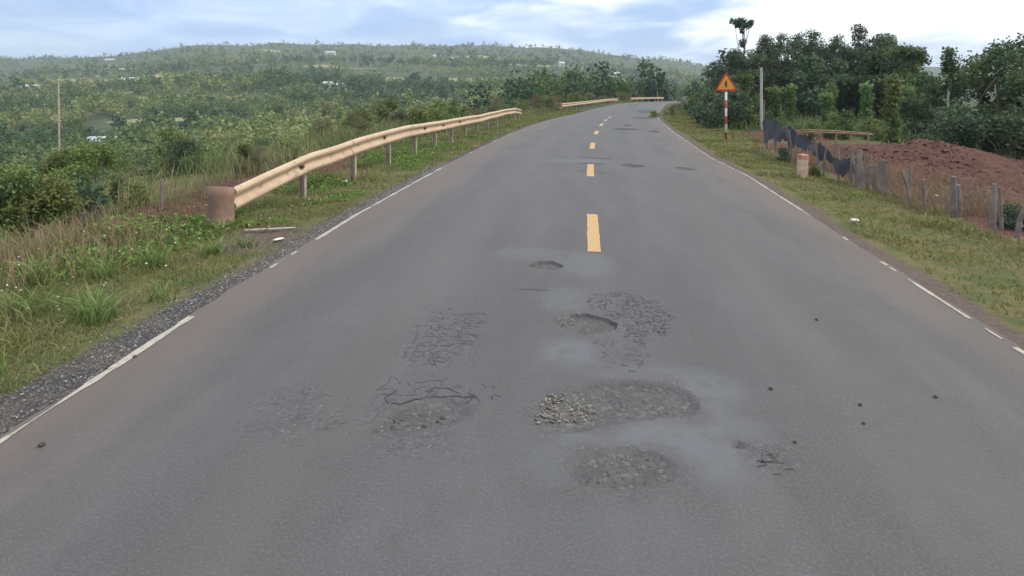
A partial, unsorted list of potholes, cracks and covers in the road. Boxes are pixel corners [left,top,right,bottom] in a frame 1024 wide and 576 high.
crack [376,311,500,406]
pothole [563,448,680,494]
pothole [533,379,702,433]
pothole [529,261,564,270]
pothole [368,397,476,441]
crack [587,292,673,371]
crack [756,451,793,474]
pothole [554,313,618,336]
